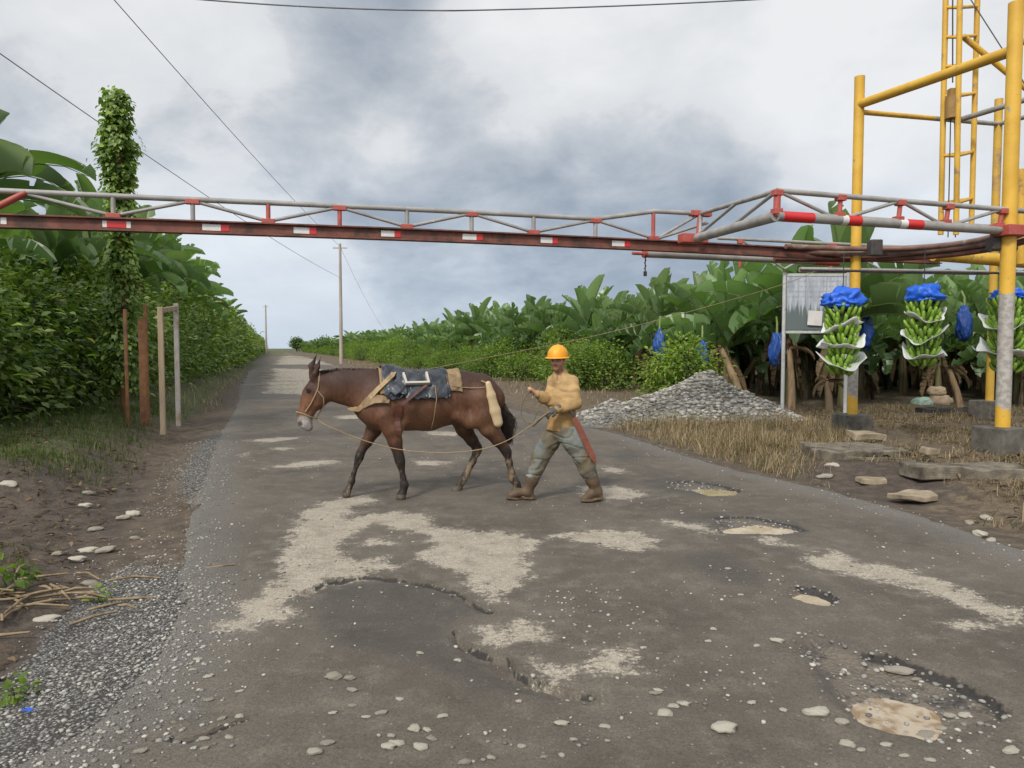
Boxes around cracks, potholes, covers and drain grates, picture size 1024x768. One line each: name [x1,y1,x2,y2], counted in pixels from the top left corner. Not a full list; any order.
pothole [783,584,842,606]
pothole [666,480,743,496]
pothole [711,515,810,535]
pothole [789,629,1013,744]
